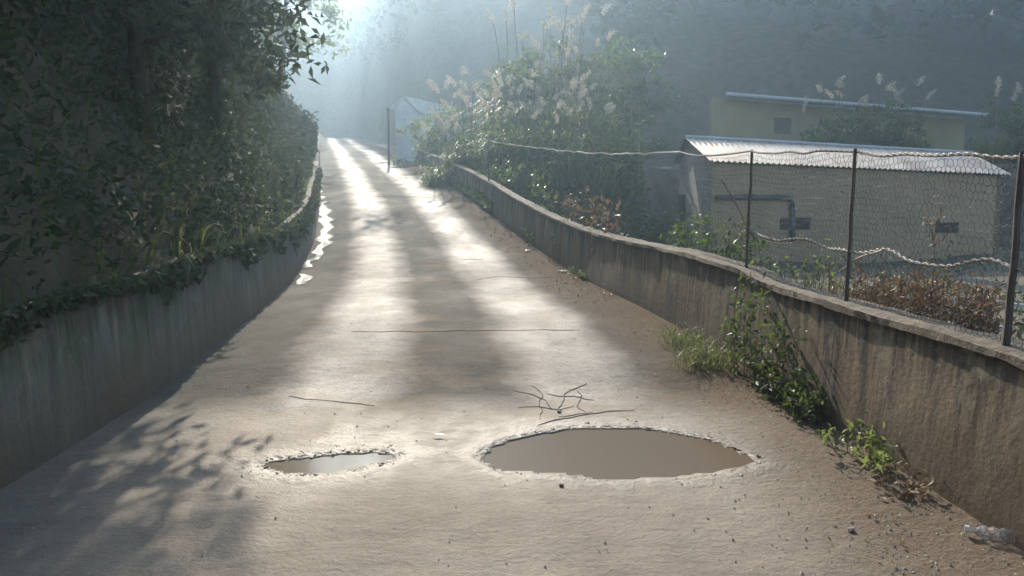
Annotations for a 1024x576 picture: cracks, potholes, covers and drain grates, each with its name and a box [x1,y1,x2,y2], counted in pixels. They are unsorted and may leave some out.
crack [289,396,374,406]
pothole [458,419,788,491]
pothole [232,443,423,487]
